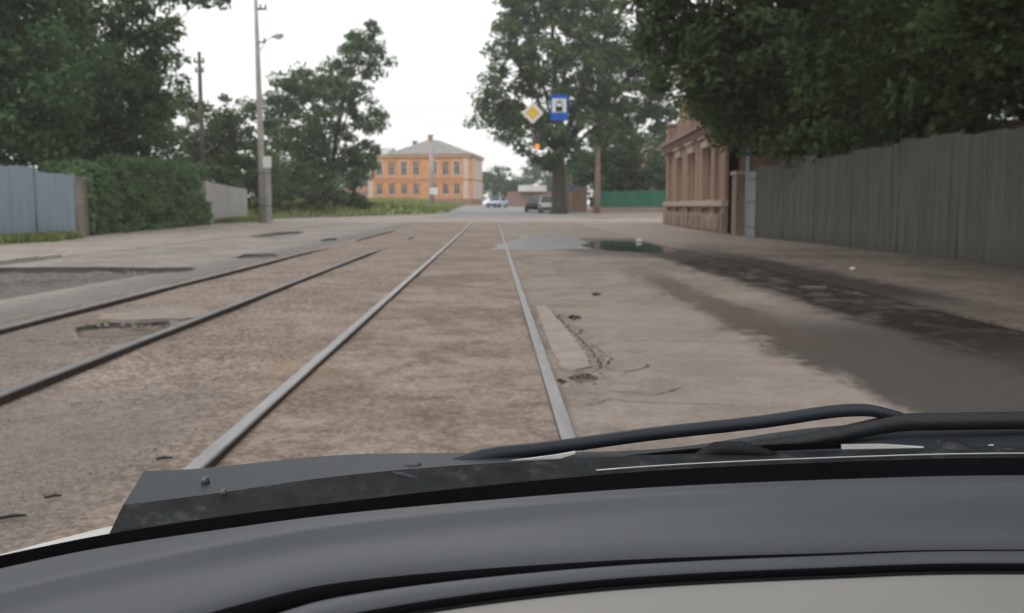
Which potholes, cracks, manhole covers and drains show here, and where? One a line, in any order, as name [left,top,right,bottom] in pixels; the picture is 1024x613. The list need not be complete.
crack [552,311,736,406]
pothole [568,373,598,383]
pothole [74,321,170,339]
